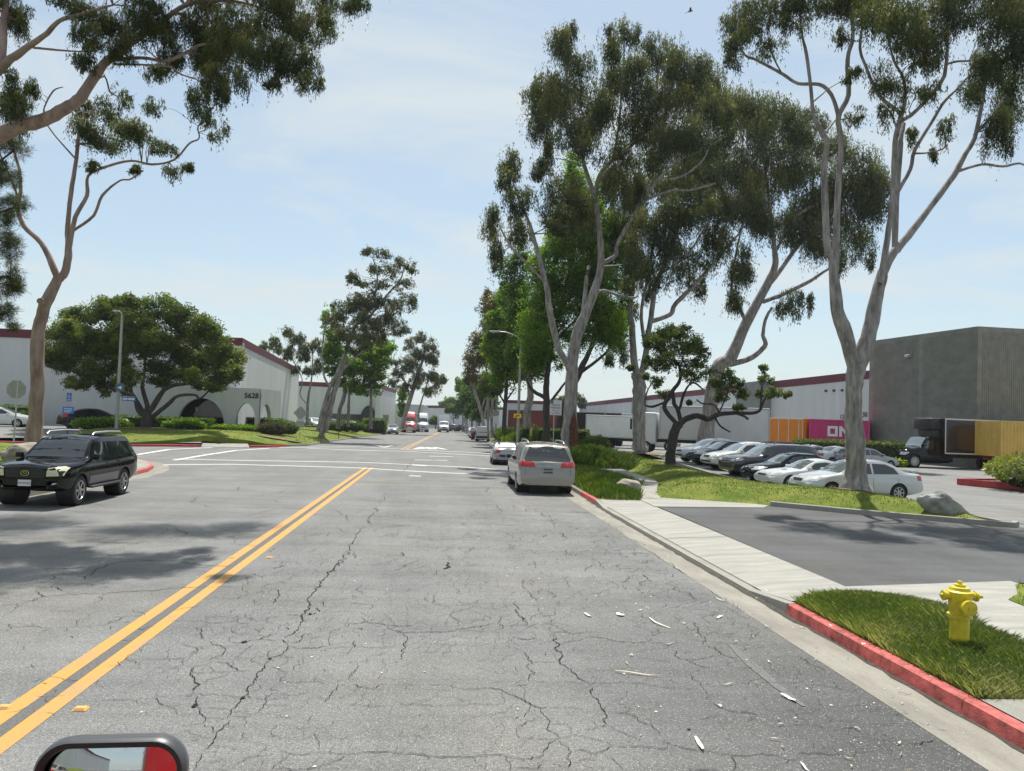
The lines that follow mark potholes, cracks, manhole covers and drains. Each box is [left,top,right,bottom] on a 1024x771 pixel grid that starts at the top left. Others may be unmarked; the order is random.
crack [6,470,957,771]
